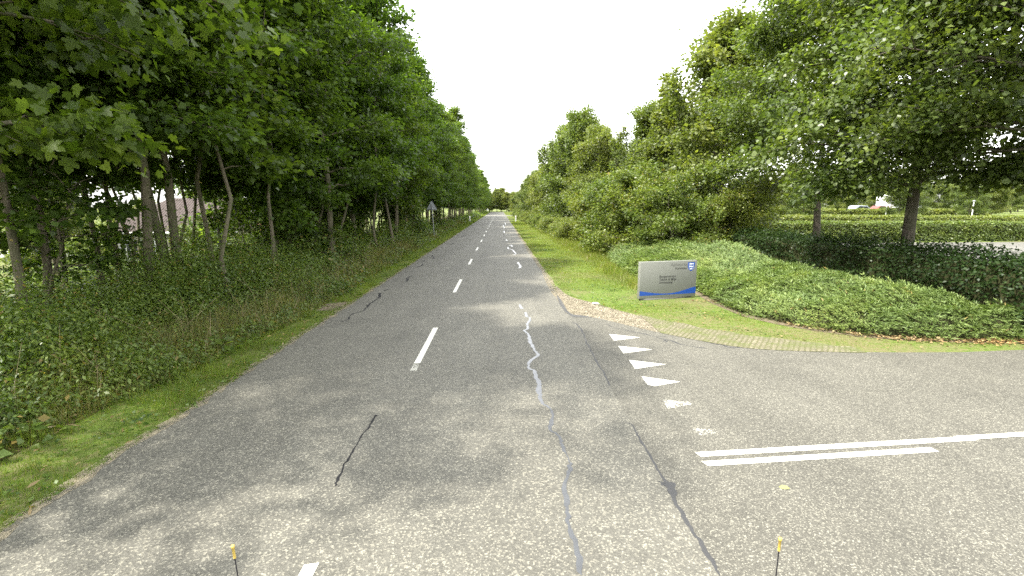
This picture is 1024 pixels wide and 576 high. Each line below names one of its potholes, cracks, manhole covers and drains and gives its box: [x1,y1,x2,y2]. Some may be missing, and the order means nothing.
crack [341,289,388,322]
crack [335,415,377,486]
